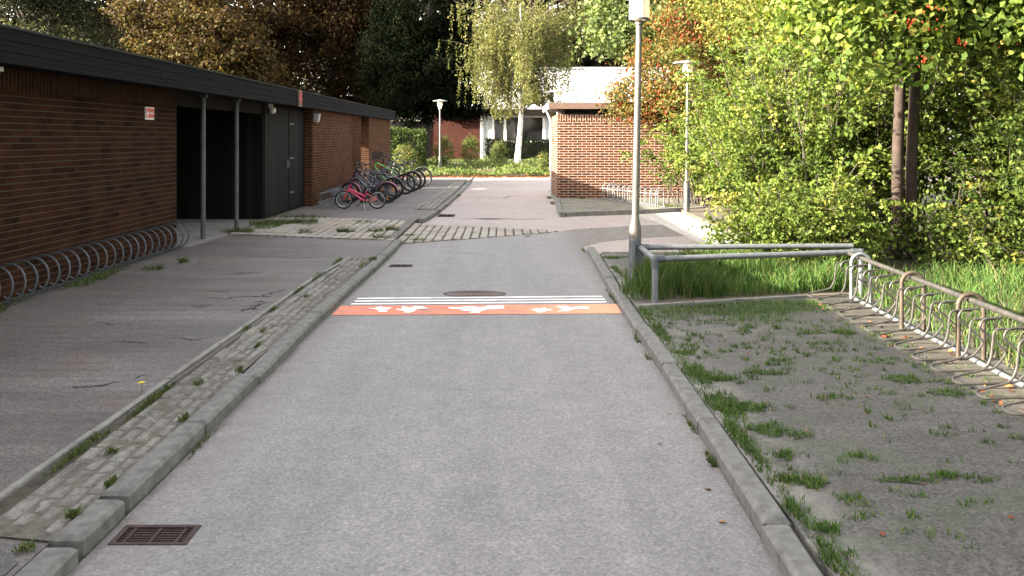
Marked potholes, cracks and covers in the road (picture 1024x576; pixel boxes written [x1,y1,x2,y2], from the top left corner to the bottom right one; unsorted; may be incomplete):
drain grate [107,525,202,545]
crack [191,290,282,312]
